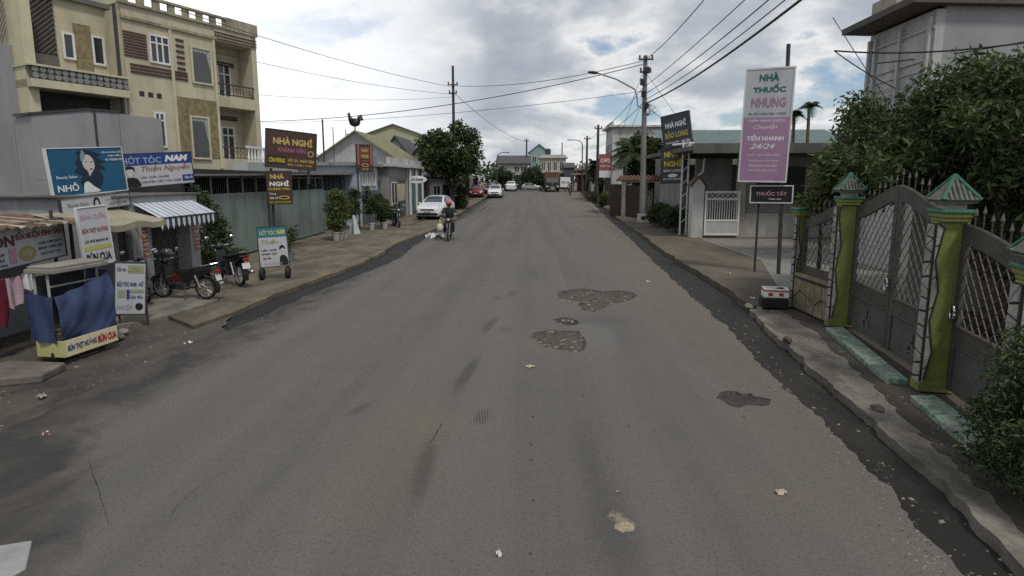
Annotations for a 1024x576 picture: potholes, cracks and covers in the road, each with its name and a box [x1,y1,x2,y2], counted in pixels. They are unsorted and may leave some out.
pothole [716,390,771,408]
pothole [530,330,587,352]
pothole [553,317,579,326]
pothole [557,288,637,312]
